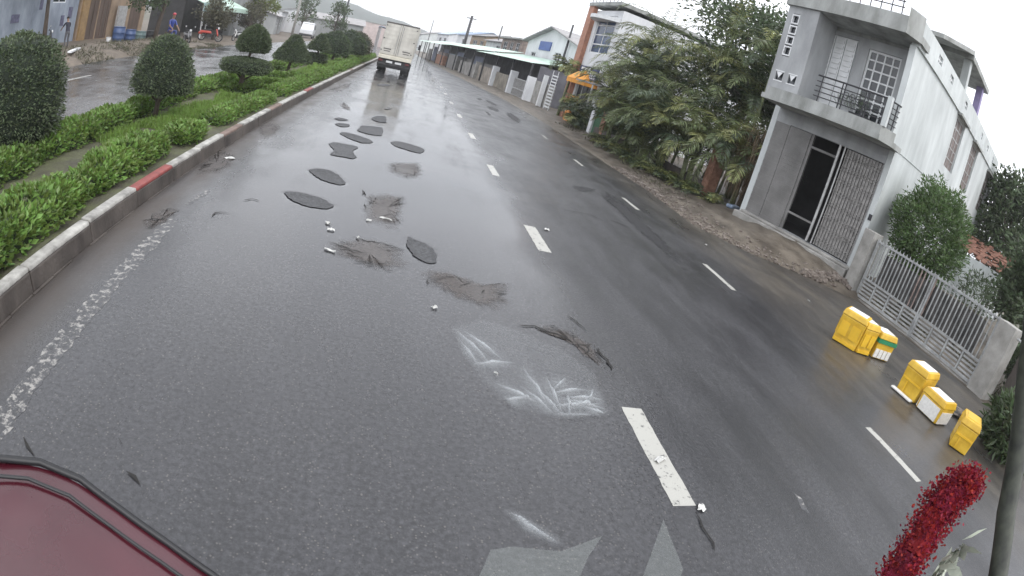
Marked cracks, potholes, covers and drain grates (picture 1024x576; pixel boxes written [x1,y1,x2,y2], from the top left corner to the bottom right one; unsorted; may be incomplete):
crack [522,315,585,344]
crack [695,512,715,550]
